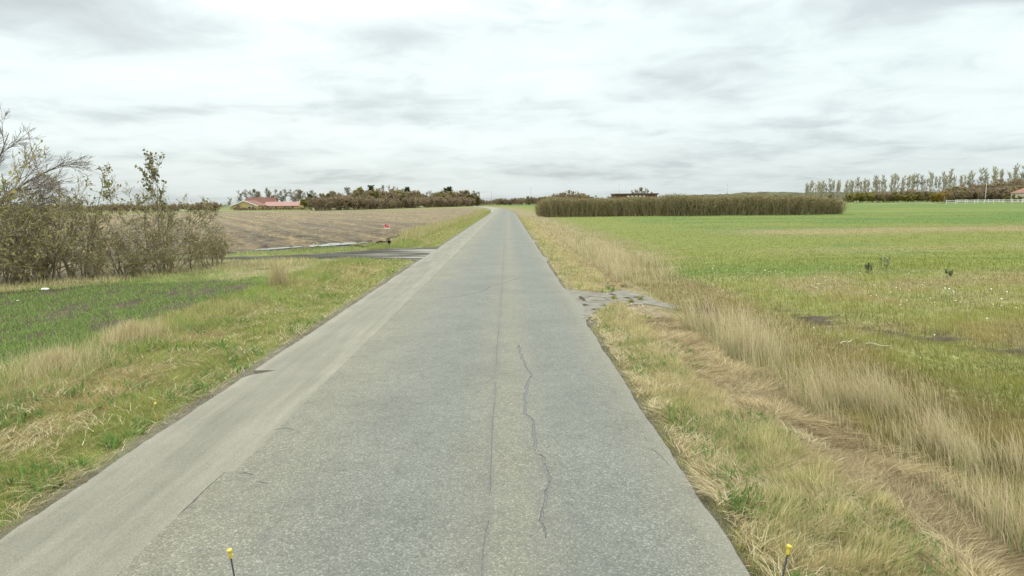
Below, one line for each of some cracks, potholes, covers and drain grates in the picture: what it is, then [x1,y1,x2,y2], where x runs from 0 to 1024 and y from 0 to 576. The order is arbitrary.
crack [518,345,552,539]
